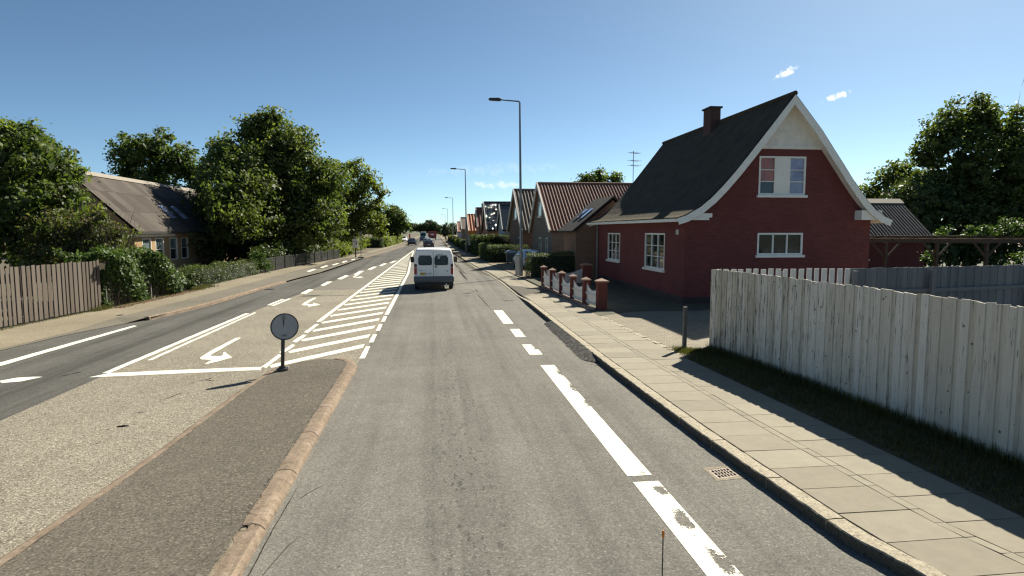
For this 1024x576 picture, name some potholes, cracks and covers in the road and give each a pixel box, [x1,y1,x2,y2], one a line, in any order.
drain grate [702,466,746,481]
